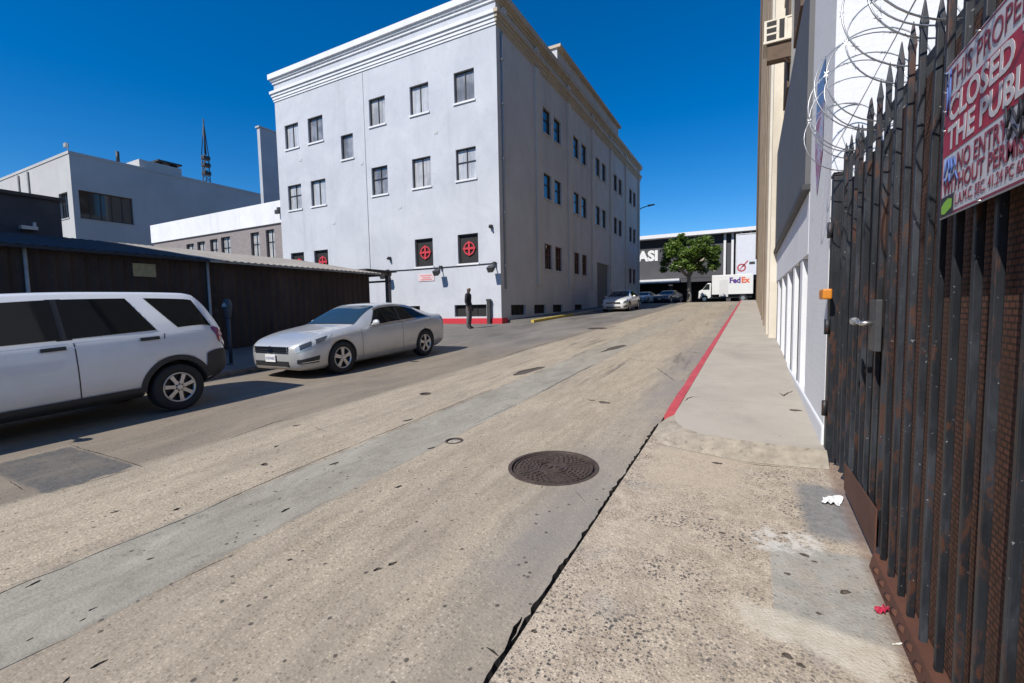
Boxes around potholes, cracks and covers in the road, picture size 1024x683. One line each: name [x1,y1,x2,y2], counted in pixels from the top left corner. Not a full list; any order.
manhole cover [508,451,599,486]
